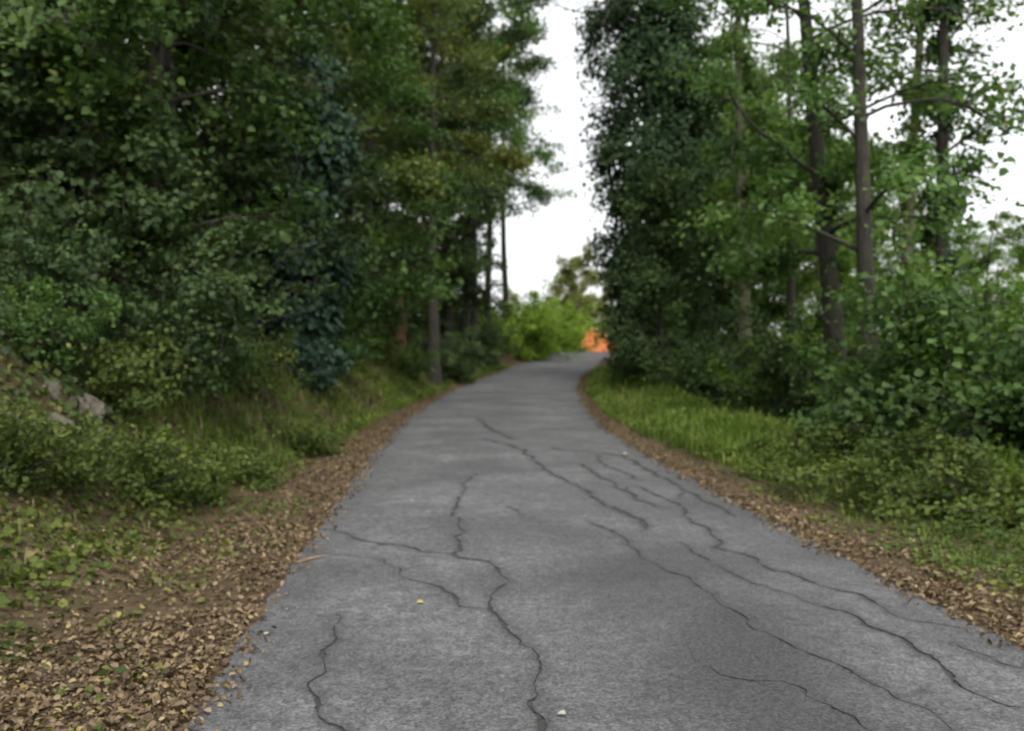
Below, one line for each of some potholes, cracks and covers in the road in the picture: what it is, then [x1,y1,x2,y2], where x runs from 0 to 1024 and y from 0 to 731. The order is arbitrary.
crack [306,613,346,731]
crack [479,419,1024,731]
crack [324,474,547,731]
